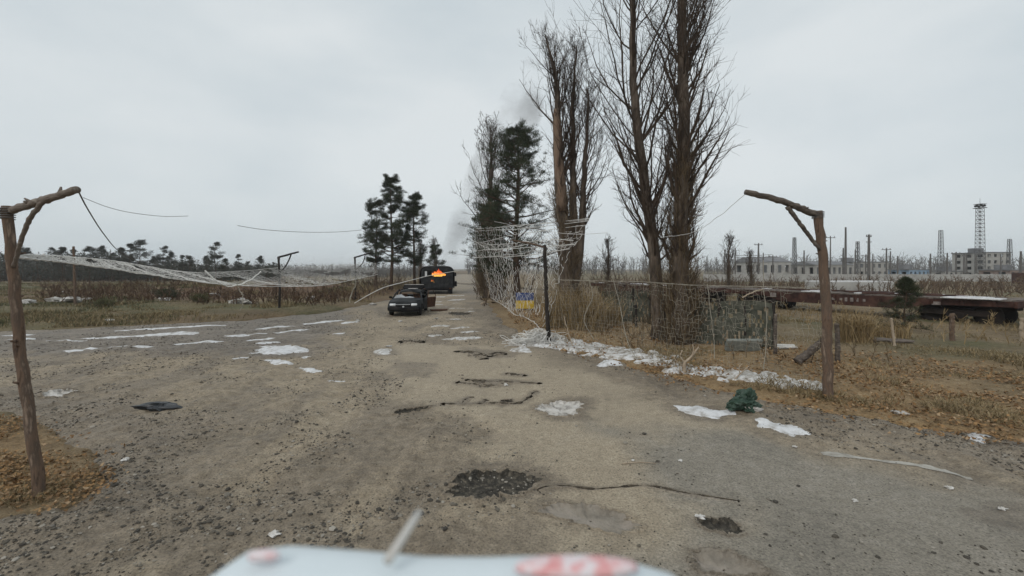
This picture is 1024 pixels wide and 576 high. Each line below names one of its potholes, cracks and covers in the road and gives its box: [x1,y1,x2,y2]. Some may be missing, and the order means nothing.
crack [455,350,538,388]
pothole [437,466,551,503]
crack [537,483,738,504]
pothole [693,516,748,537]
